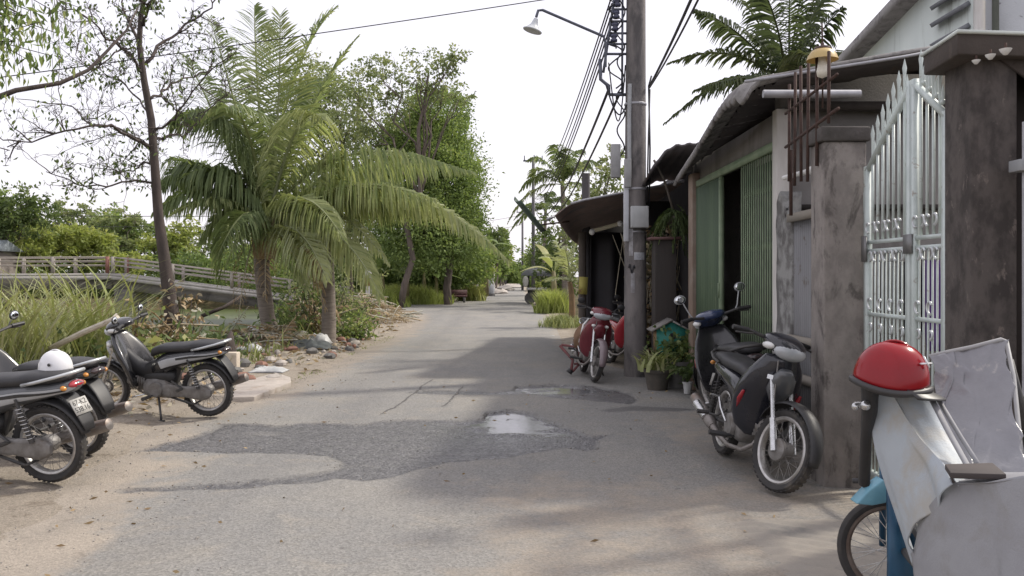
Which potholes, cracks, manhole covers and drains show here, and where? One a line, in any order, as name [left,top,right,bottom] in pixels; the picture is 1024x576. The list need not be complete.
crack [381,379,463,414]
pothole [409,384,640,404]
